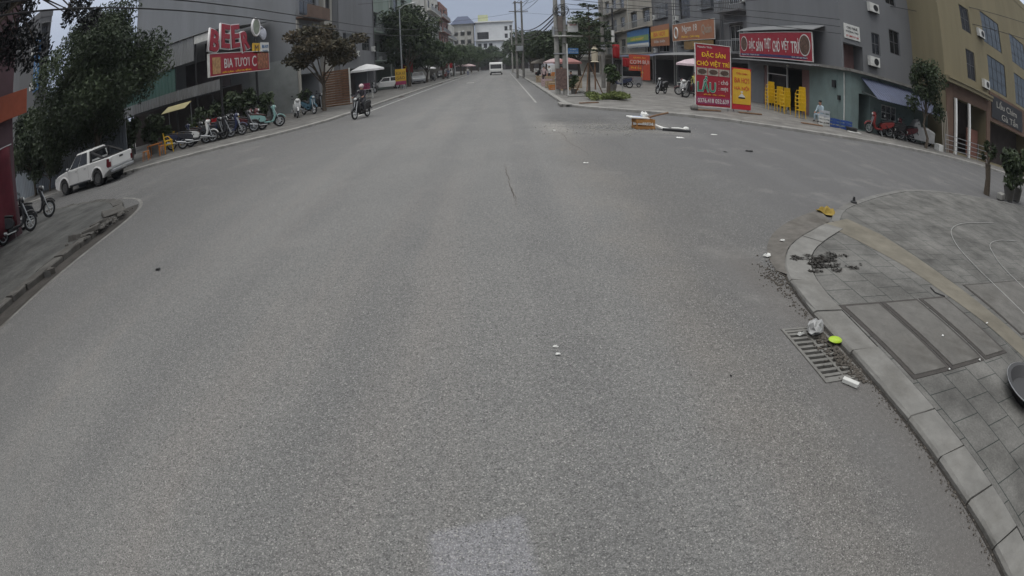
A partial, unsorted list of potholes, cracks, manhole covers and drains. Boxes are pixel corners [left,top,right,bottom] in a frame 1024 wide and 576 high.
drain grate [781,327,865,383]
